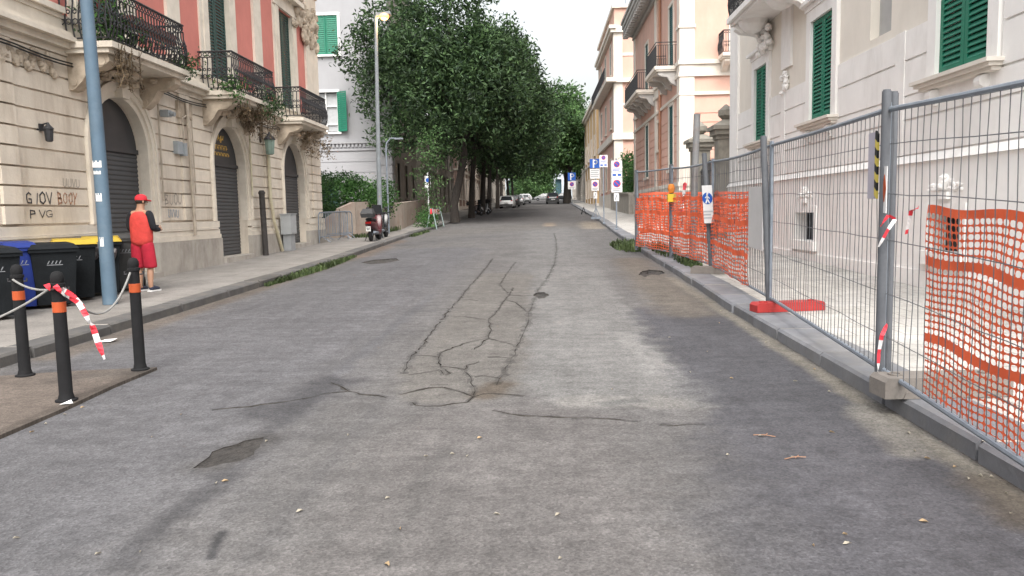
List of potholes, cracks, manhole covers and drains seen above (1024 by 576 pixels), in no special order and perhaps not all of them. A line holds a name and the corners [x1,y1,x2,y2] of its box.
pothole [194,437,264,468]
crack [400,235,641,422]
crack [214,382,384,410]
